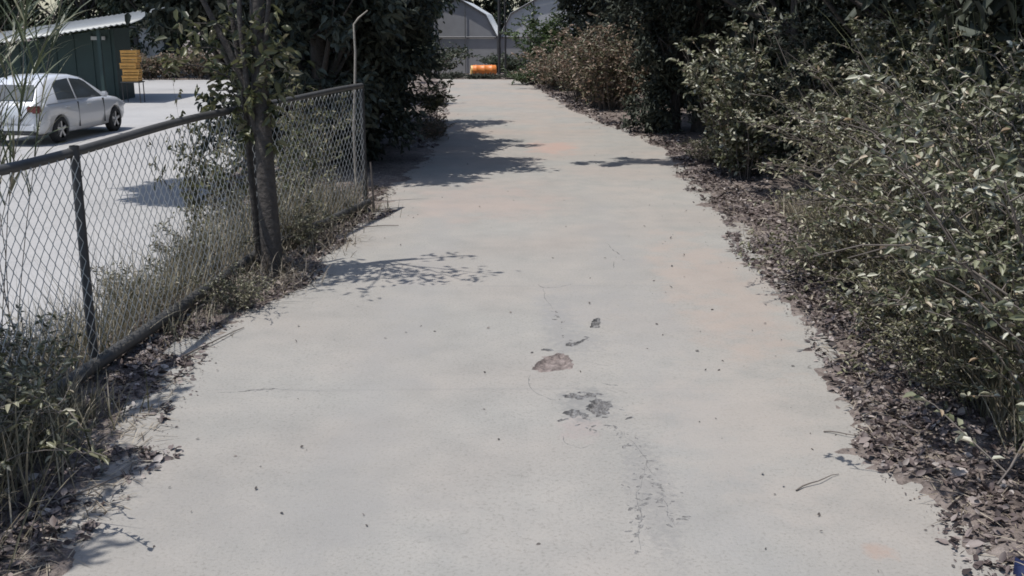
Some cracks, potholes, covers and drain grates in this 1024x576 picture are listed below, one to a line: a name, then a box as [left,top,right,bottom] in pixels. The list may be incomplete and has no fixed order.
pothole [557,391,633,429]
crack [539,284,570,338]
pothole [532,351,574,373]
crack [563,422,691,554]
